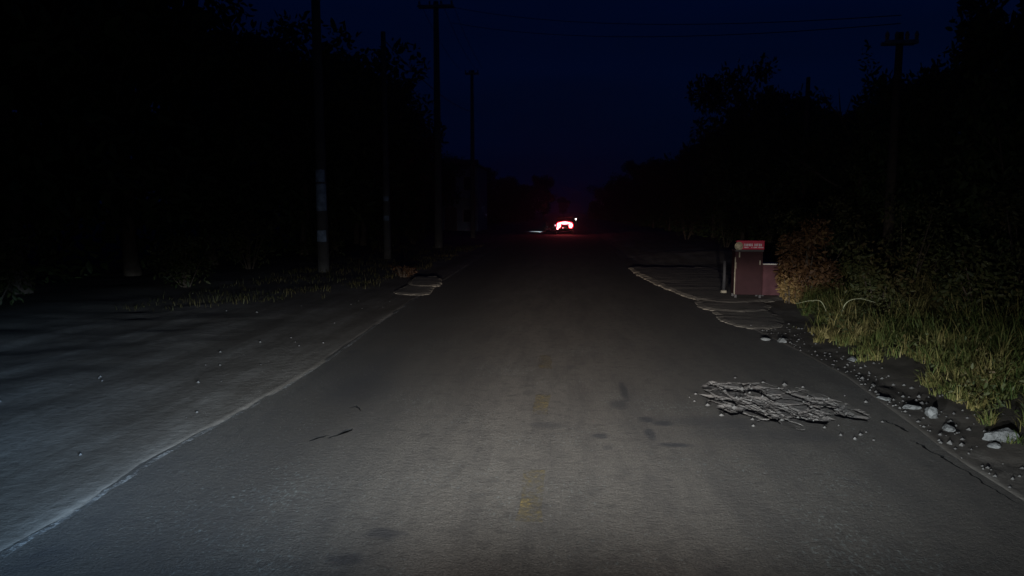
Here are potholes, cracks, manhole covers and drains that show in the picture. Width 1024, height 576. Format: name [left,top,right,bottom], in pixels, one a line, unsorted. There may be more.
crack [885,420,1021,505]
pothole [696,381,871,433]
